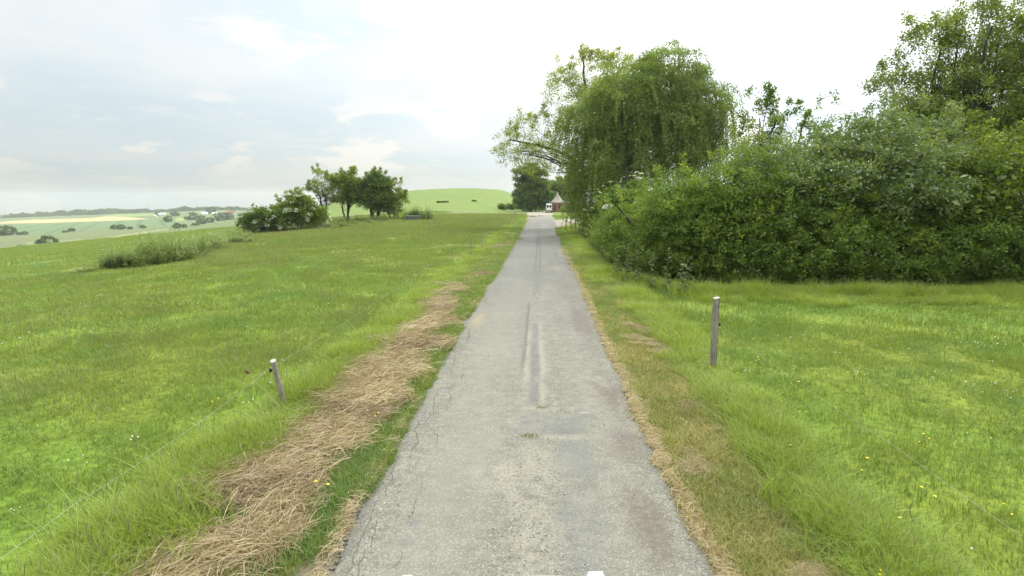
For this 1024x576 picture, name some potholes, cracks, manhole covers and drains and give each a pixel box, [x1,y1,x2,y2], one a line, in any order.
crack [346,293,486,576]
